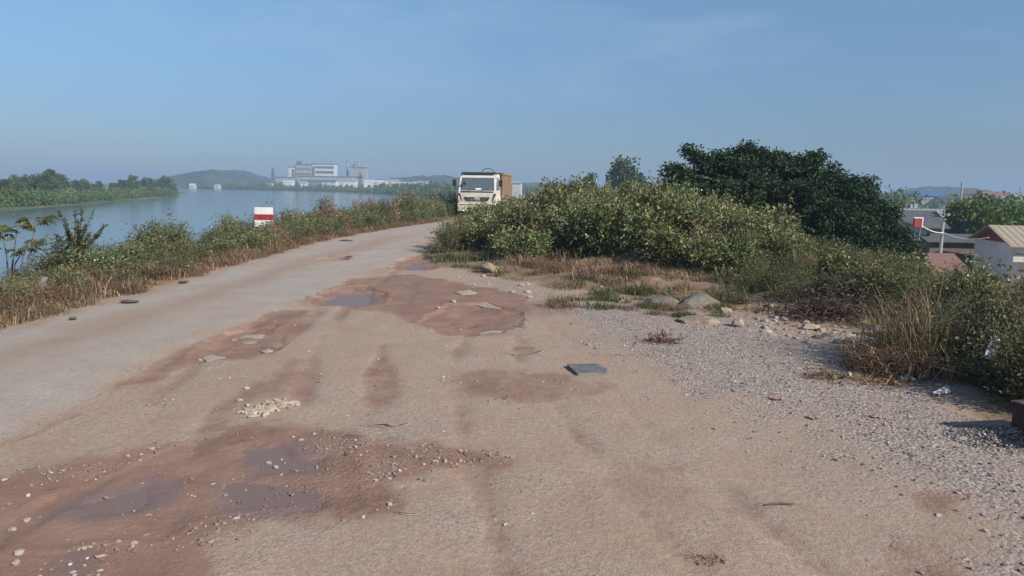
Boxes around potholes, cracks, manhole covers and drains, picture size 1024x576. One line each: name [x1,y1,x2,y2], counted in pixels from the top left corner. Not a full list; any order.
pothole [386,257,441,271]
pothole [411,301,531,338]
pothole [181,324,293,366]
pothole [0,437,394,555]
pothole [305,284,397,307]
